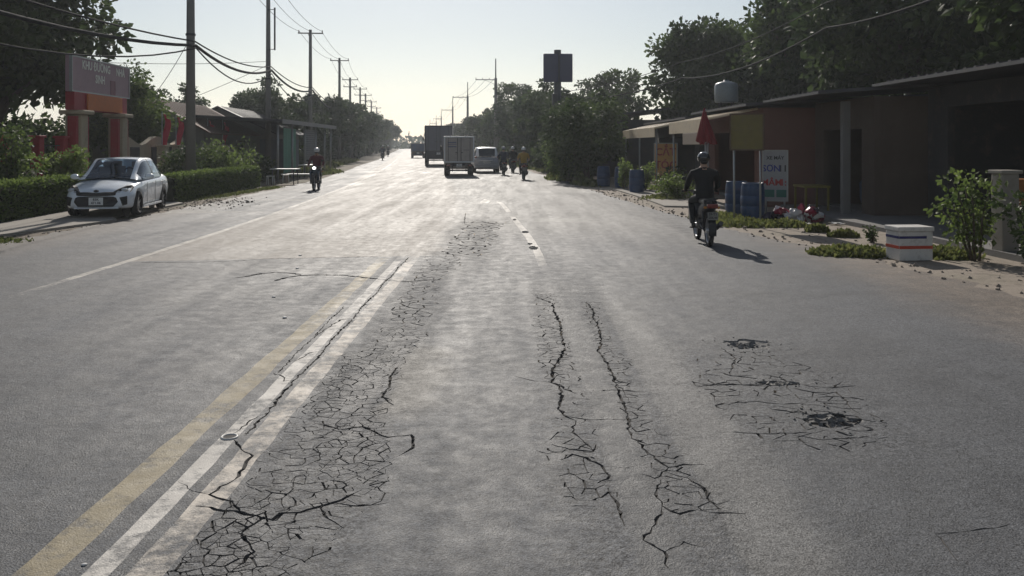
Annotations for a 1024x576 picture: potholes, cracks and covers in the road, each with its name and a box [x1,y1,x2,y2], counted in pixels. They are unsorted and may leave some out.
crack [515,294,744,568]
pothole [783,407,886,434]
crack [142,256,461,576]
pothole [702,337,782,353]
pothole [749,378,817,387]
crack [692,348,888,452]
crack [935,524,1009,562]
